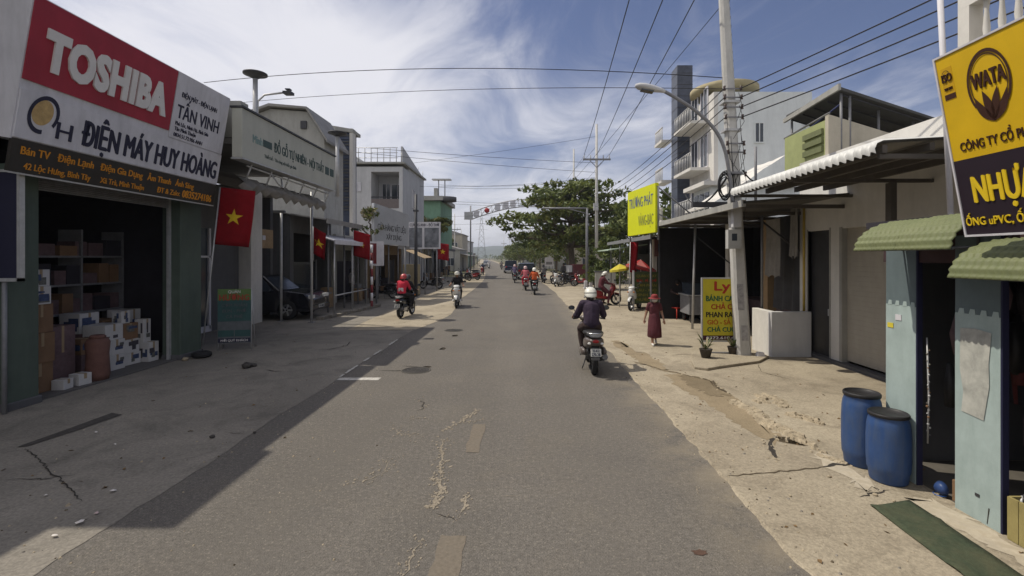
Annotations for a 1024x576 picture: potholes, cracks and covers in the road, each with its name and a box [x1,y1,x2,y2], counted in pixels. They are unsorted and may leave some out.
crack [343,398,484,576]
crack [5,413,122,500]
